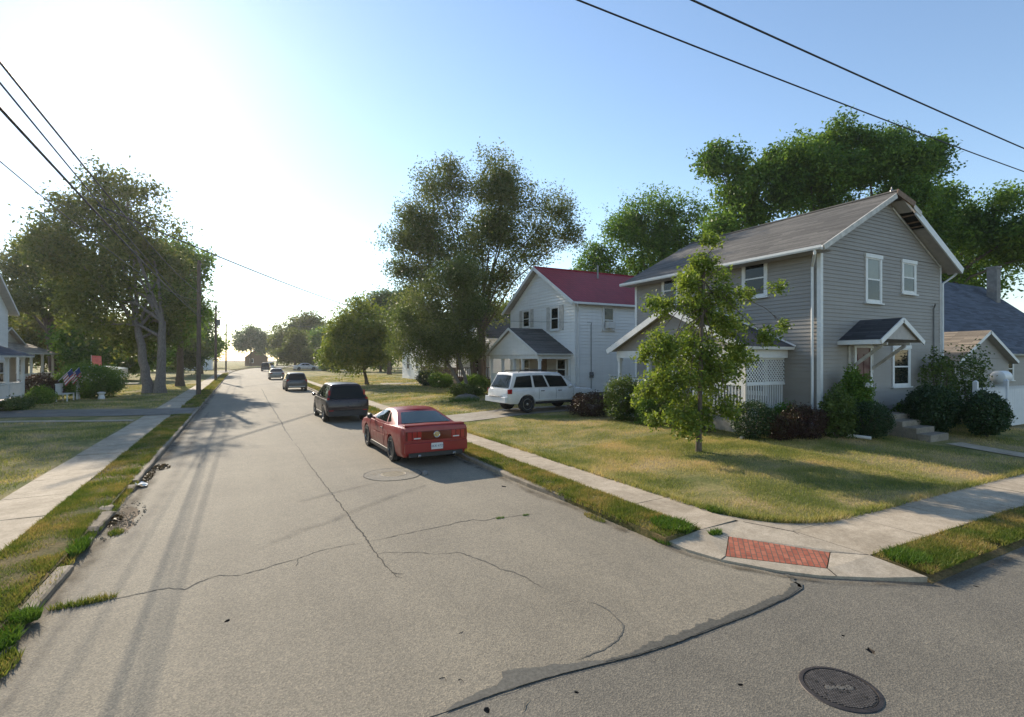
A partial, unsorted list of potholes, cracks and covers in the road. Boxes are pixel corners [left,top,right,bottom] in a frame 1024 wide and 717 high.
manhole cover [363,468,422,481]
manhole cover [798,666,885,714]
pothole [108,507,140,536]
crack [109,446,539,600]
